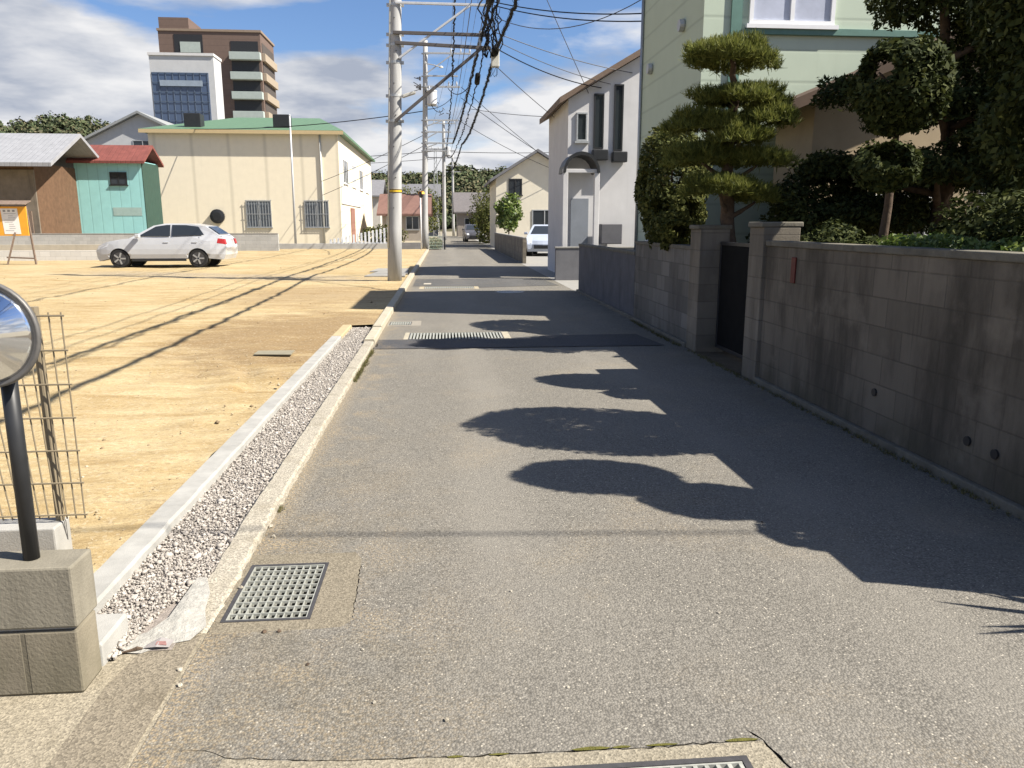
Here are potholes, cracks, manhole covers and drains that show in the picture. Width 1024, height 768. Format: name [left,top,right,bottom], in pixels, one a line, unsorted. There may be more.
drain grate [209,552,362,634]
crack [747,730,792,768]
